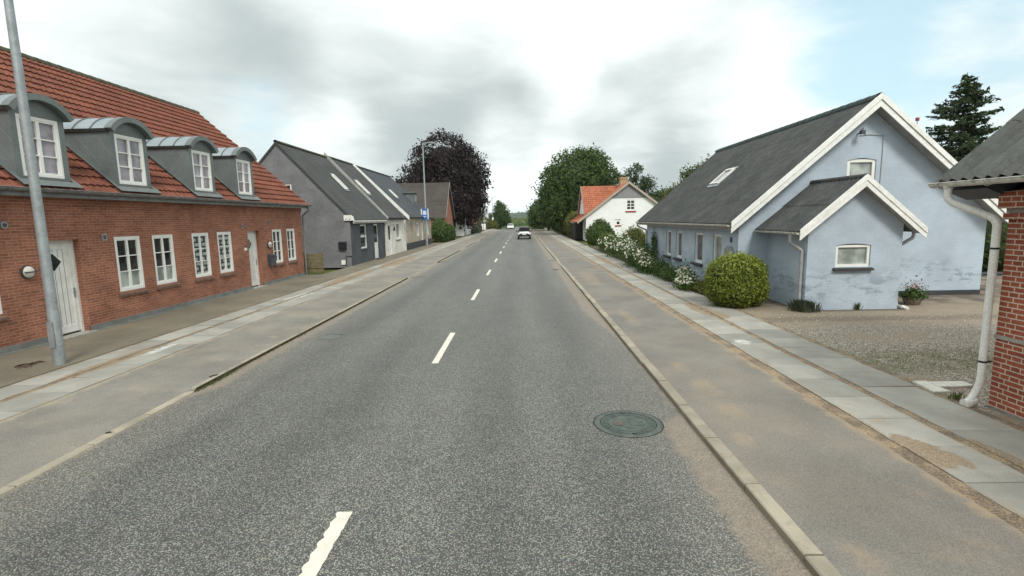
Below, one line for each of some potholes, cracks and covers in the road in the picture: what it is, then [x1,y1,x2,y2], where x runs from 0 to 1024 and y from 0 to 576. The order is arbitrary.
manhole cover [593,410,664,438]
pothole [13,360,46,369]
